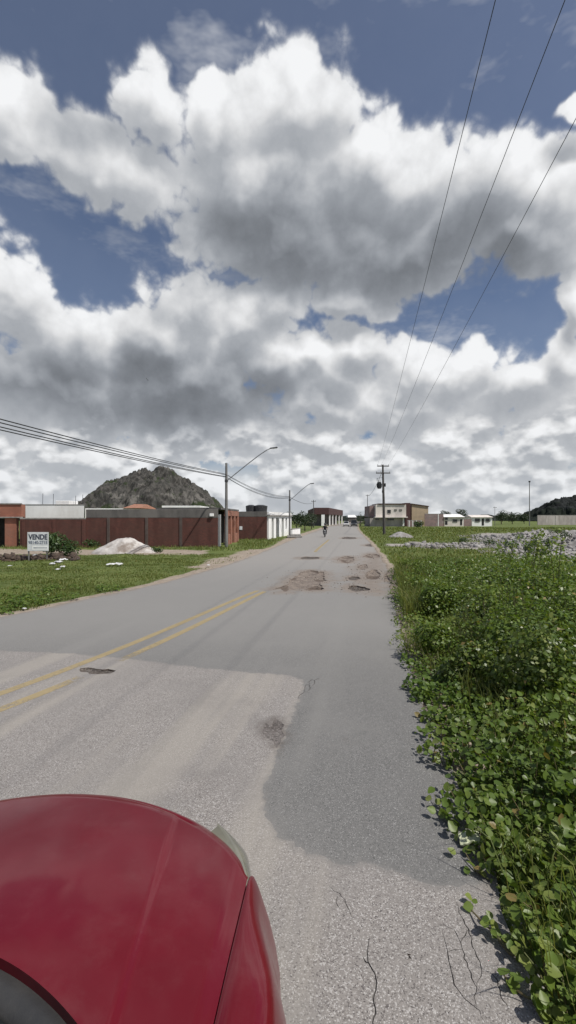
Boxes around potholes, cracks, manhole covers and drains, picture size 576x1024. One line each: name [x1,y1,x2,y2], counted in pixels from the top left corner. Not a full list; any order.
crack [436,904,509,1022]
crack [363,941,377,1024]
pothole [276,570,328,592]
pothole [263,719,285,748]
pothole [366,570,381,580]
